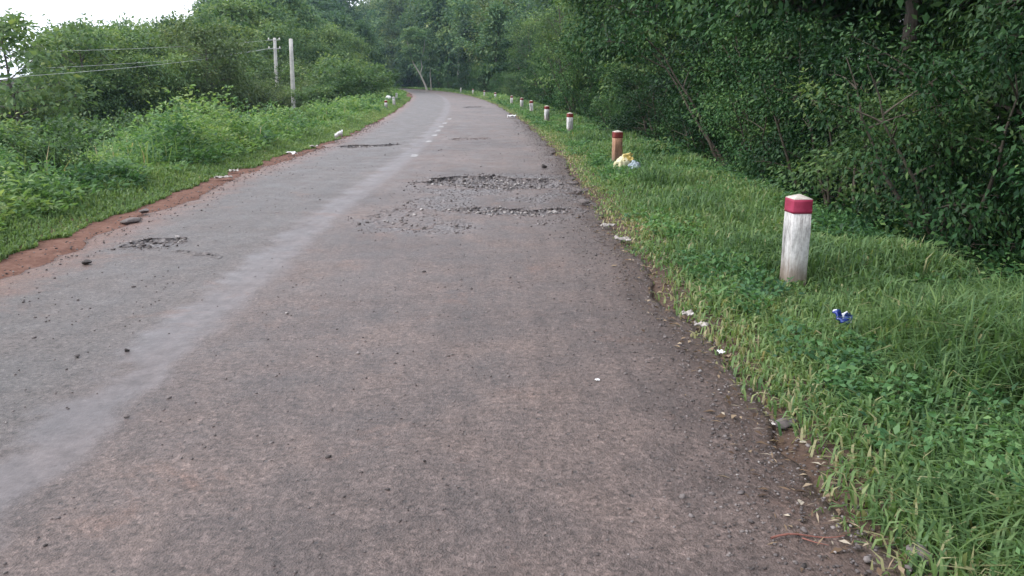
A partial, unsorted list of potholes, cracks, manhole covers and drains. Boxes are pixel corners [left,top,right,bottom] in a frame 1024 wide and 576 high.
pothole [443,206,578,217]
pothole [408,174,581,191]
pothole [111,235,192,251]
